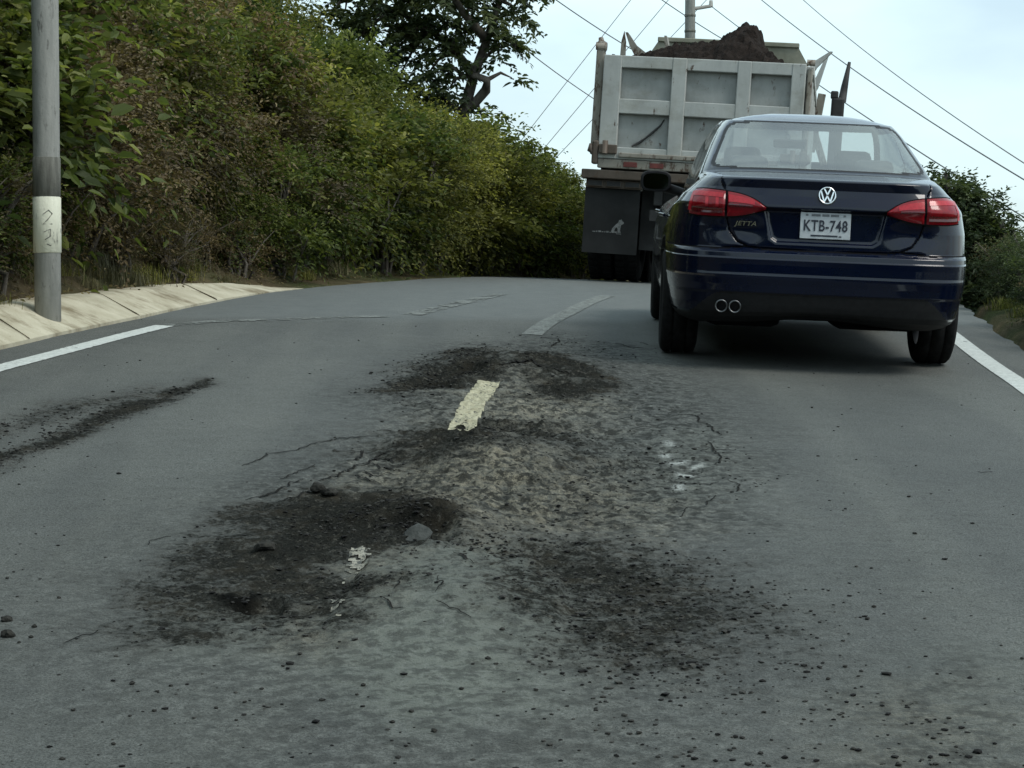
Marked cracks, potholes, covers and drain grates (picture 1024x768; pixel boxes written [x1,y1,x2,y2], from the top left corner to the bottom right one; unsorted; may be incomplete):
pothole [401,505,464,543]
crack [672,414,741,516]
pothole [409,360,491,389]
crack [242,436,396,502]
pothole [226,596,291,615]
